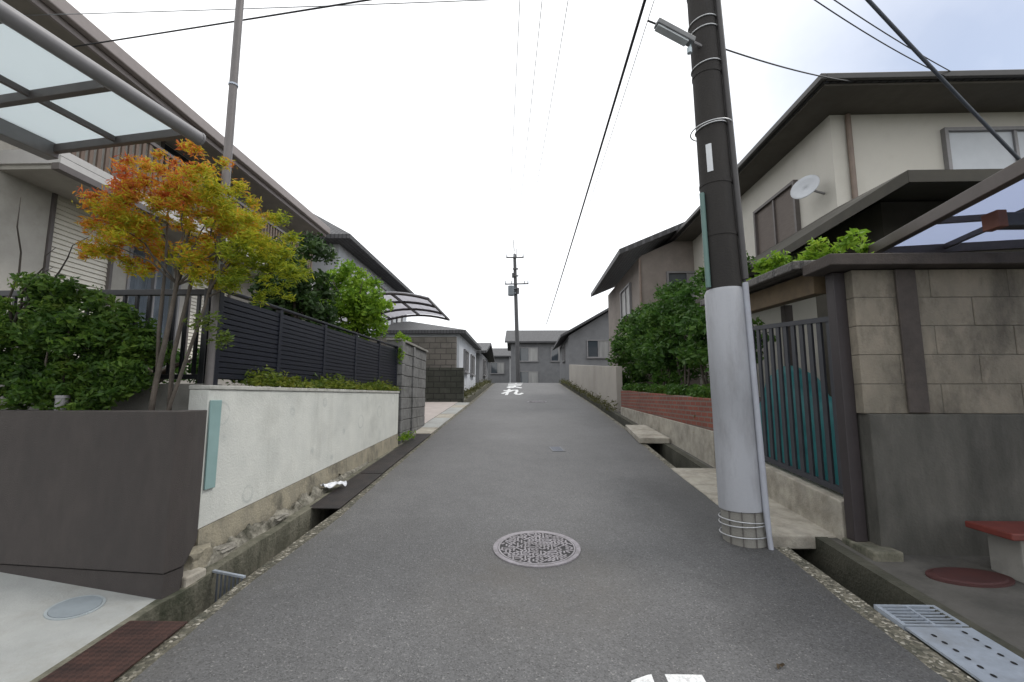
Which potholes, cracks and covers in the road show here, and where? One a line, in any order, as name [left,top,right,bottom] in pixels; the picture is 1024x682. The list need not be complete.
manhole cover [493,531,581,568]
drain grate [874,604,968,634]
